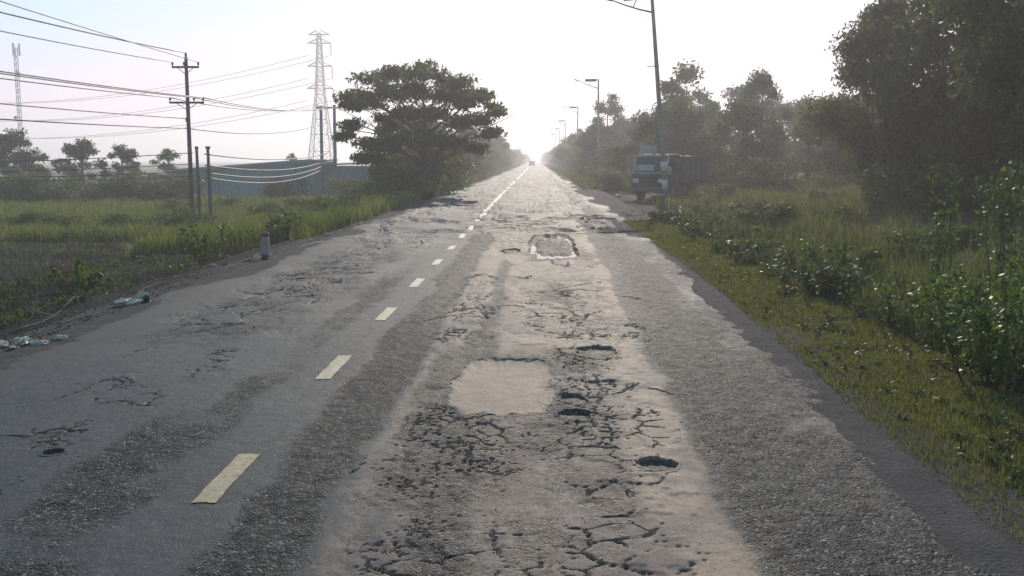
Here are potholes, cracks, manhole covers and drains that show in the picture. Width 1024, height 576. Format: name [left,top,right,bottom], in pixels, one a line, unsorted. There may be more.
pothole [631,455,683,473]
crack [559,511,706,576]
crack [392,406,523,498]
crack [0,420,87,448]
pothole [553,407,594,423]
pothole [573,345,620,360]
pothole [38,447,69,457]
pothole [578,217,624,230]
crack [355,518,544,576]
crack [123,229,453,376]
crack [57,375,165,406]
pothole [526,233,580,260]
